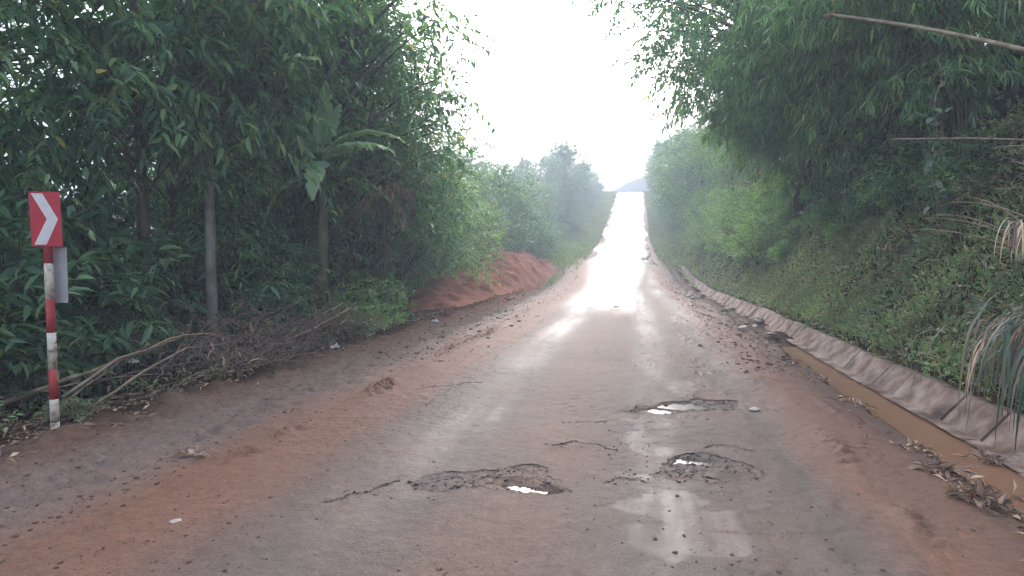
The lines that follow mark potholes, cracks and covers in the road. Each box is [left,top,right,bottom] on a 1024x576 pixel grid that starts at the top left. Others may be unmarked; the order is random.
pothole [406,463,573,496]
crack [319,477,409,506]
crack [545,420,622,451]
pothole [649,452,765,484]
pothole [619,398,739,415]
crack [593,475,660,487]
crack [415,381,483,390]
